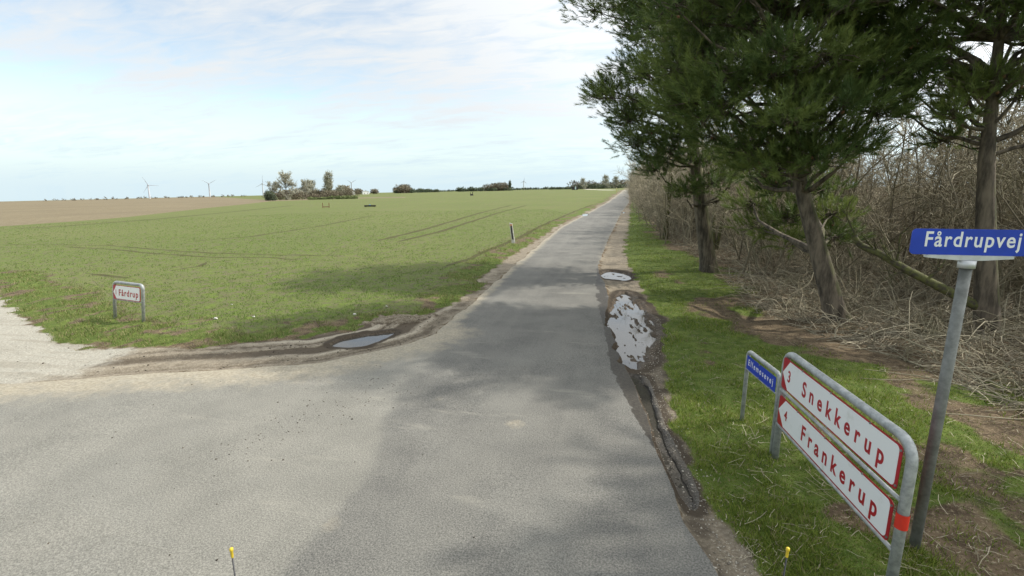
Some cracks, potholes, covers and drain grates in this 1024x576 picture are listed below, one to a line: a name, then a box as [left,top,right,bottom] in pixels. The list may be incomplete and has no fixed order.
crack [642,383,693,502]
pothole [329,330,396,346]
pothole [604,291,667,370]
